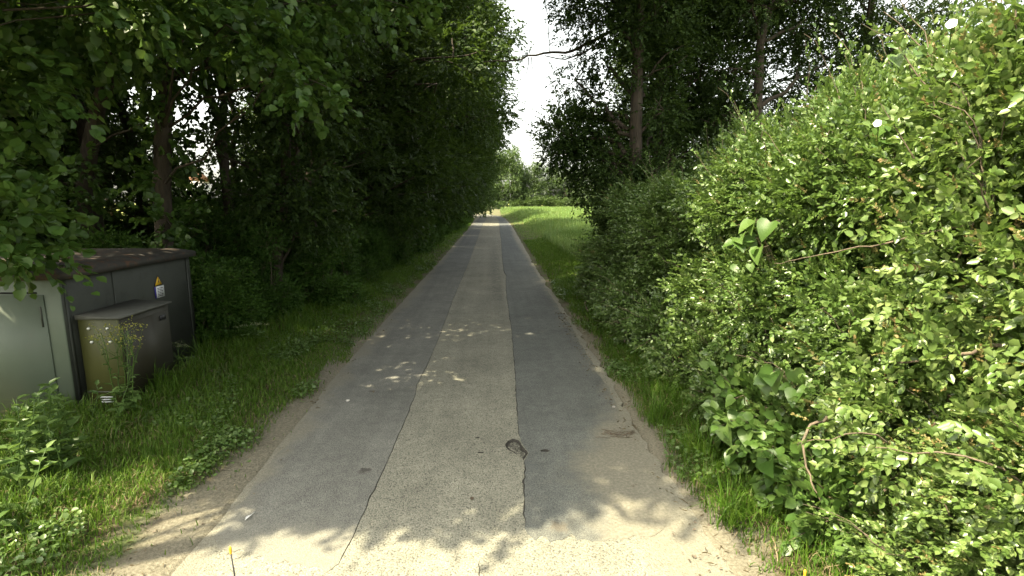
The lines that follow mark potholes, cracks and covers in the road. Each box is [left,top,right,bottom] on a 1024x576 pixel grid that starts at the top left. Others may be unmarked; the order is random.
pothole [505,439,528,460]
